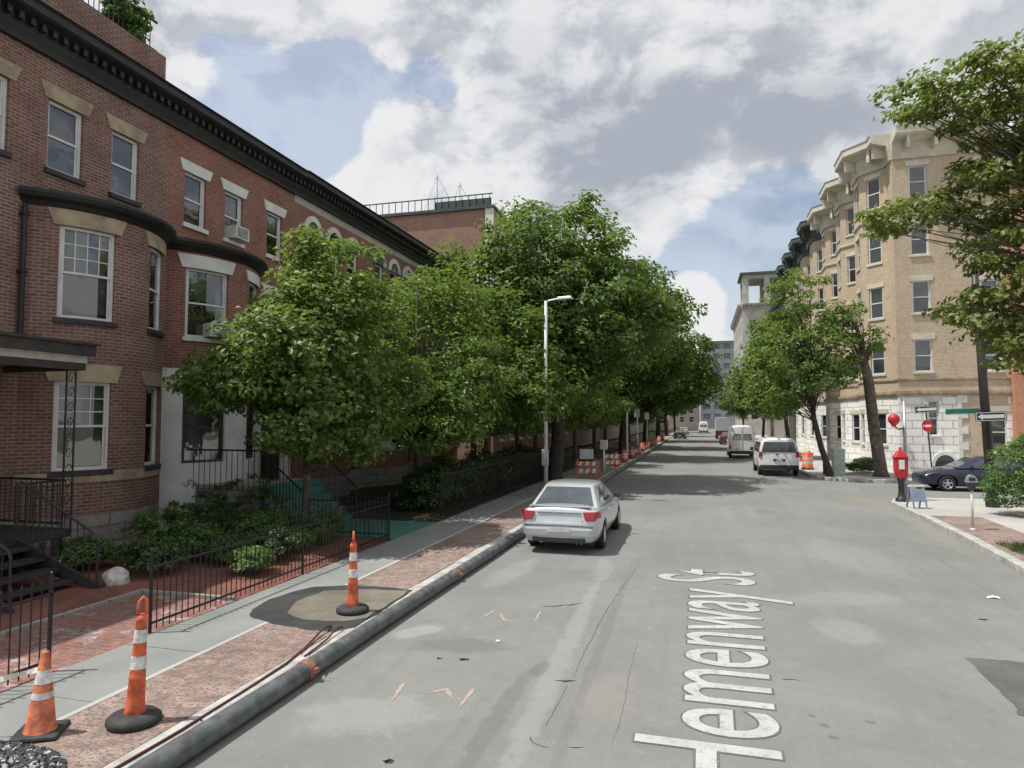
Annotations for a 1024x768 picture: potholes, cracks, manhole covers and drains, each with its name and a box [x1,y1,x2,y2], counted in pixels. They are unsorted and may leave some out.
crack [530,564,640,748]
